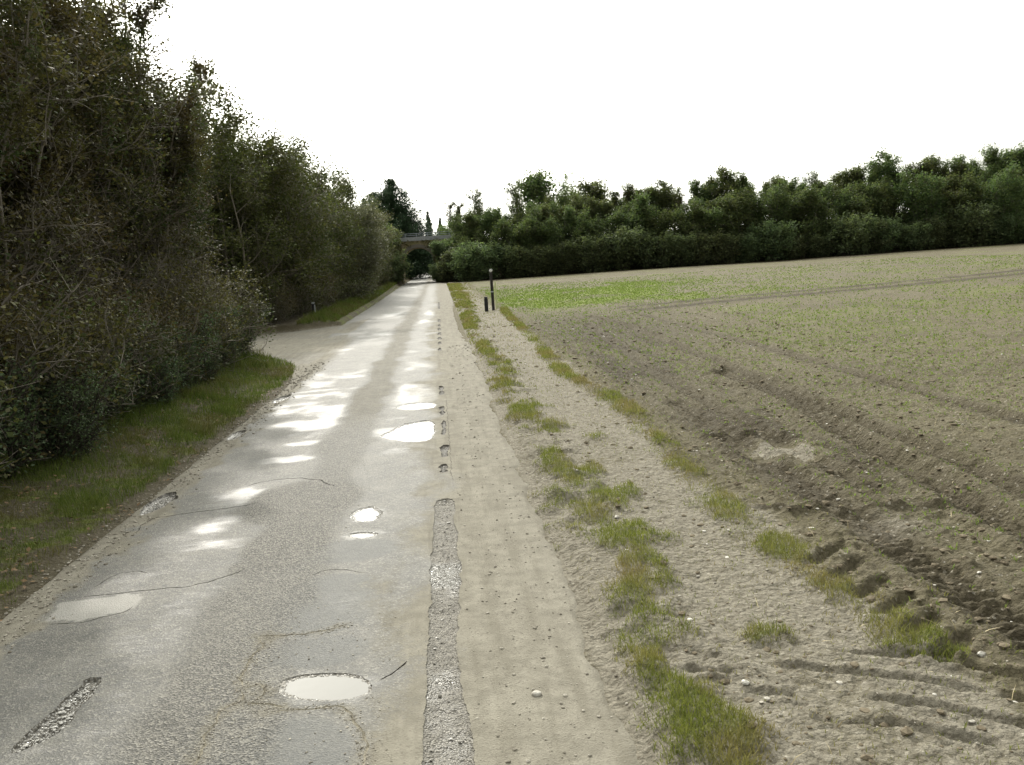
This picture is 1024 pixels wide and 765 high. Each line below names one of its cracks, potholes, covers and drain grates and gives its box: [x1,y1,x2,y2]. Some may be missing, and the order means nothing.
crack [42,568,245,625]
pothole [380,420,436,442]
crack [193,624,370,765]
crack [138,478,334,531]
pothole [139,492,178,515]
pothole [396,402,437,410]
pothole [11,677,102,754]
pothole [421,498,475,765]
pothole [278,673,372,701]
pothole [350,506,384,522]
